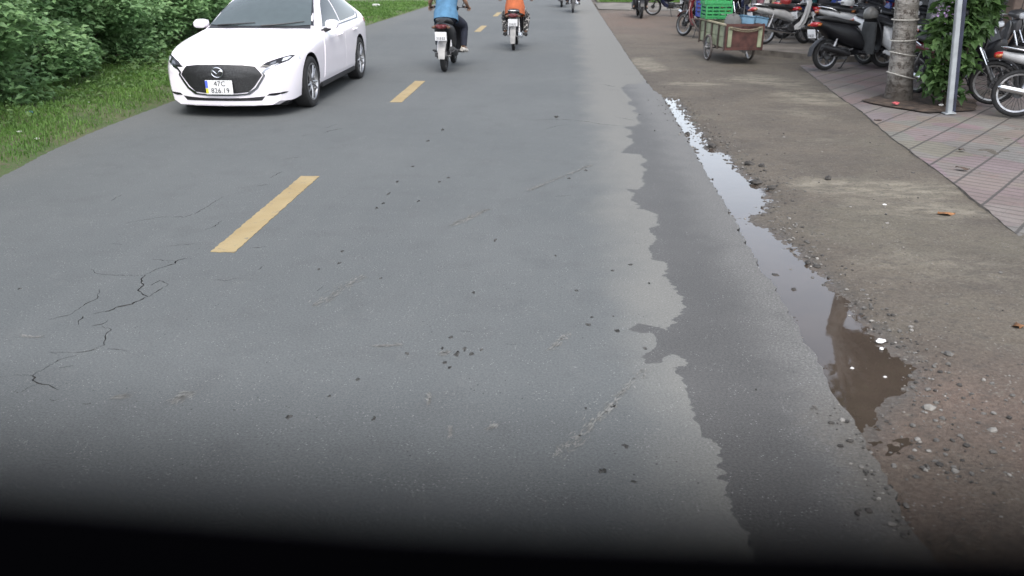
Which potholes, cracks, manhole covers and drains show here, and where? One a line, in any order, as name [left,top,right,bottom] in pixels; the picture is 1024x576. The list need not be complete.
crack [23,244,189,401]
